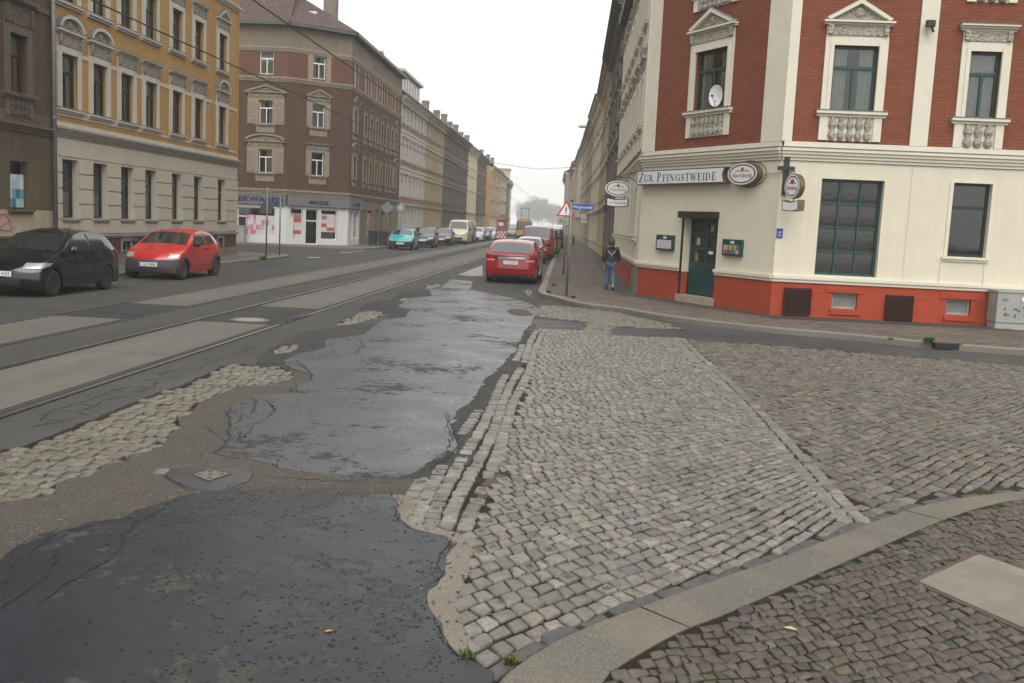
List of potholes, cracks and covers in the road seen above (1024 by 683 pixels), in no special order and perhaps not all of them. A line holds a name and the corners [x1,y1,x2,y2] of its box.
crack [0,469,201,609]
manhole cover [191,469,233,481]
crack [196,359,314,459]
